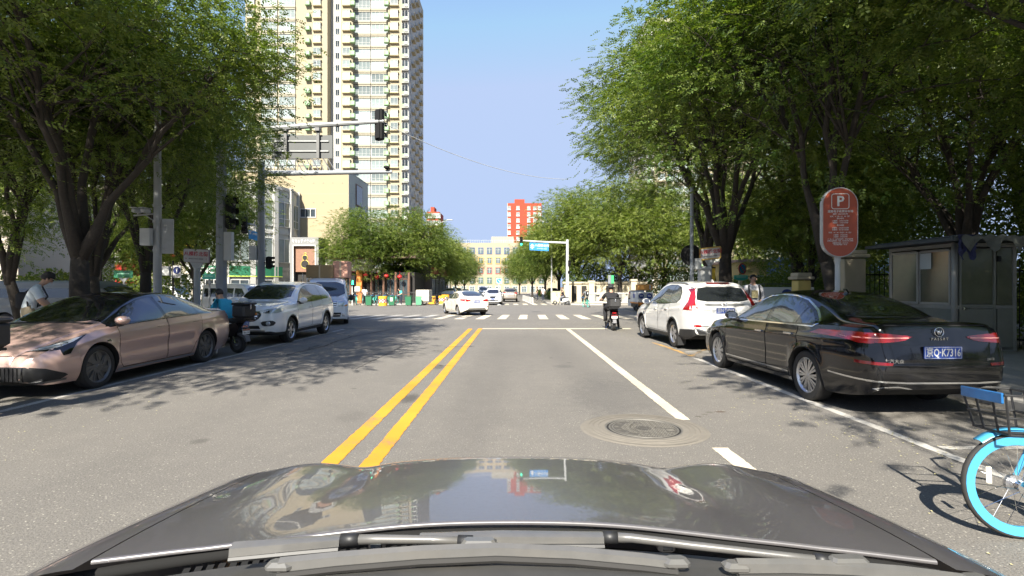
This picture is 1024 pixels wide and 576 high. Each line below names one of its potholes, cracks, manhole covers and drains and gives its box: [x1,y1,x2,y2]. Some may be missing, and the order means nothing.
manhole cover [580,414,711,447]
